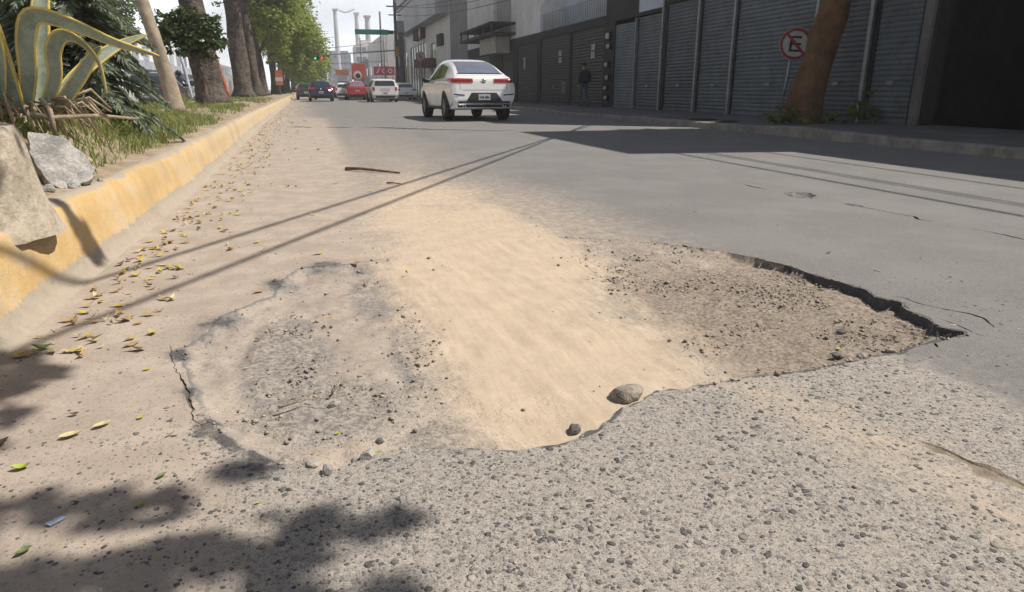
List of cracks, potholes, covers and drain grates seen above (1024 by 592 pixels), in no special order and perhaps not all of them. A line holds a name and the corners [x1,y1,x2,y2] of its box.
crack [169,345,203,429]
pothole [178,238,964,471]
crack [916,440,1024,489]
crack [892,296,995,335]
